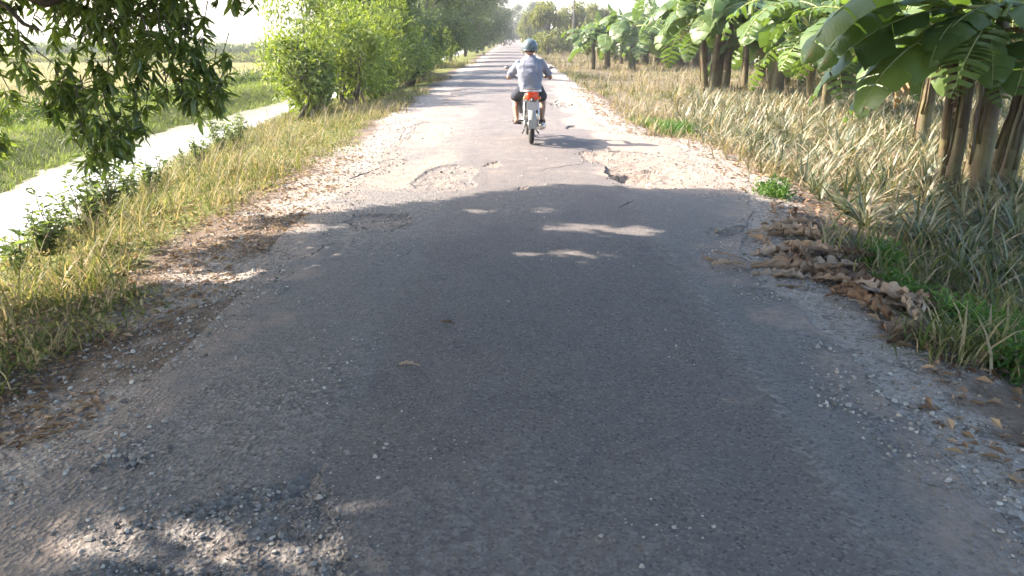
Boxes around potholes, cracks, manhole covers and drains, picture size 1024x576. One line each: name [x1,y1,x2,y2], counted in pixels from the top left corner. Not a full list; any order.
pothole [341,212,422,232]
pothole [403,164,483,192]
